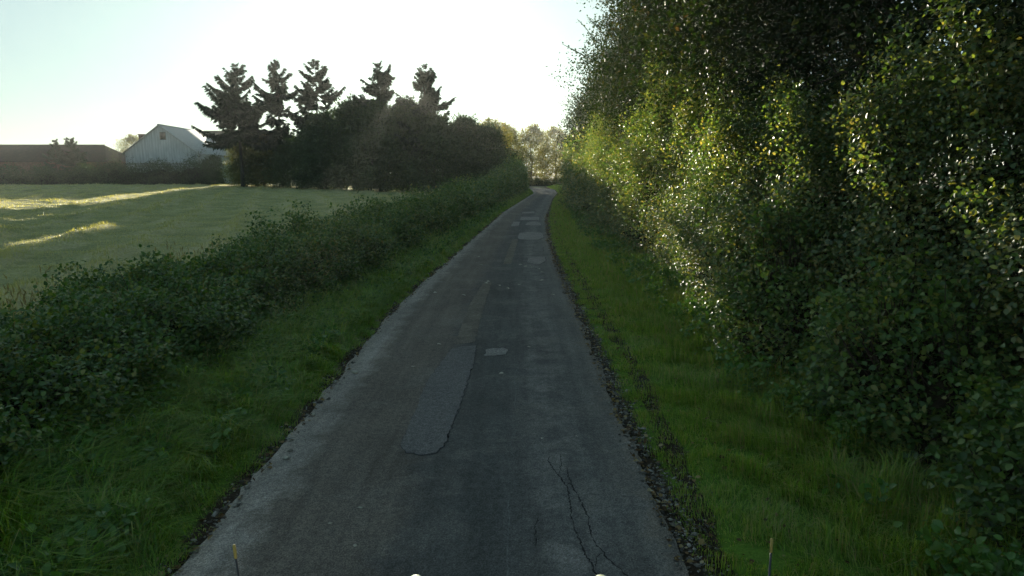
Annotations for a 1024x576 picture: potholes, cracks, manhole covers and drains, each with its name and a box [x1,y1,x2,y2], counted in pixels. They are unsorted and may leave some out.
crack [548,454,628,576]
